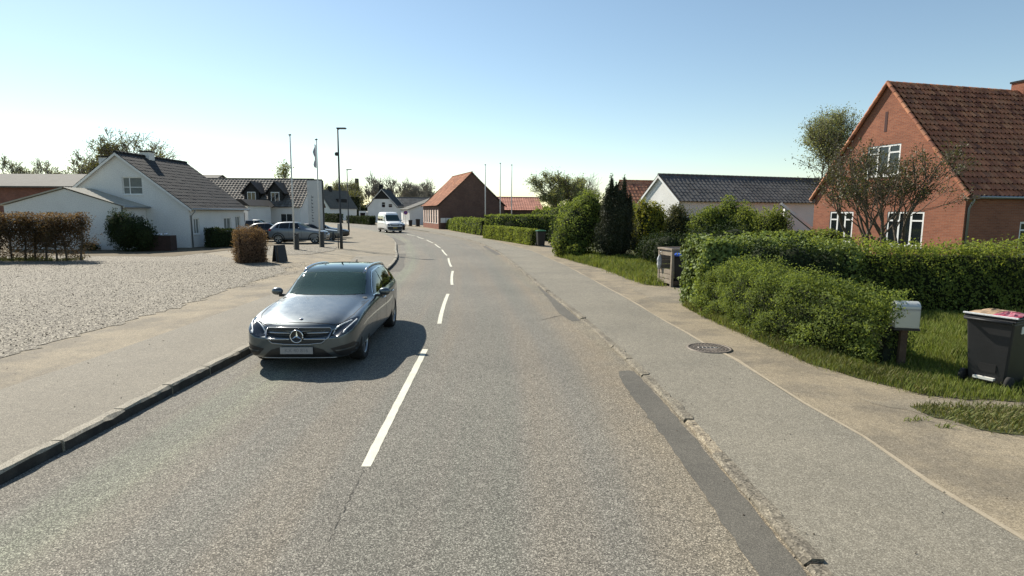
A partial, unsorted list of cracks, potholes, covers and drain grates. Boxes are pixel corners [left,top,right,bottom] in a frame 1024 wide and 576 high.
manhole cover [687,343,732,354]
